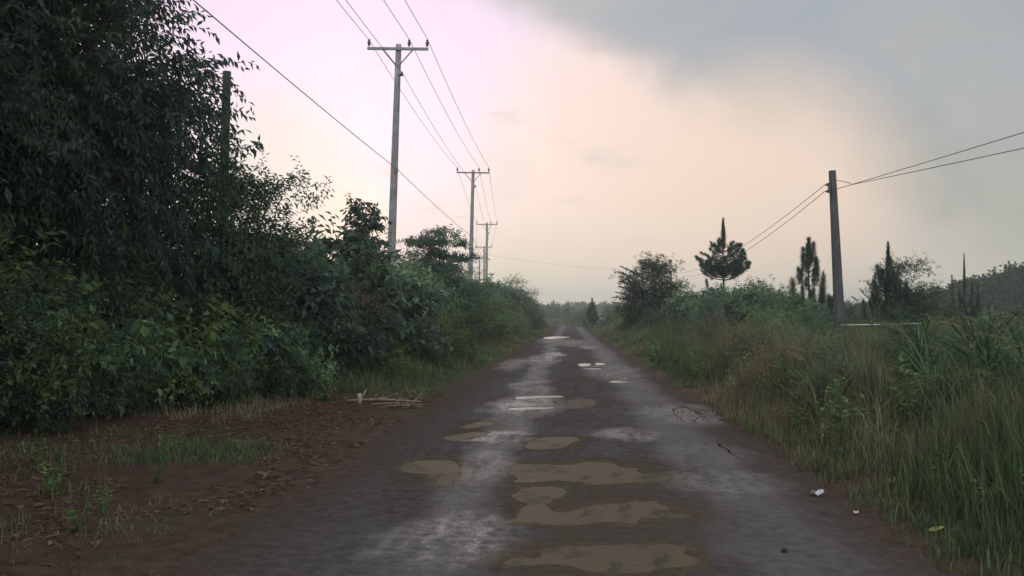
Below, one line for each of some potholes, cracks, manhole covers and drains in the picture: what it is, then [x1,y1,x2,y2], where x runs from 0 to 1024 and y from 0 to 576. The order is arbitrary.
pothole [502,542,702,573]
pothole [507,461,674,485]
pothole [563,399,597,409]
pothole [509,485,696,525]
pothole [524,436,579,449]
pothole [399,459,462,486]
pothole [443,431,491,441]
